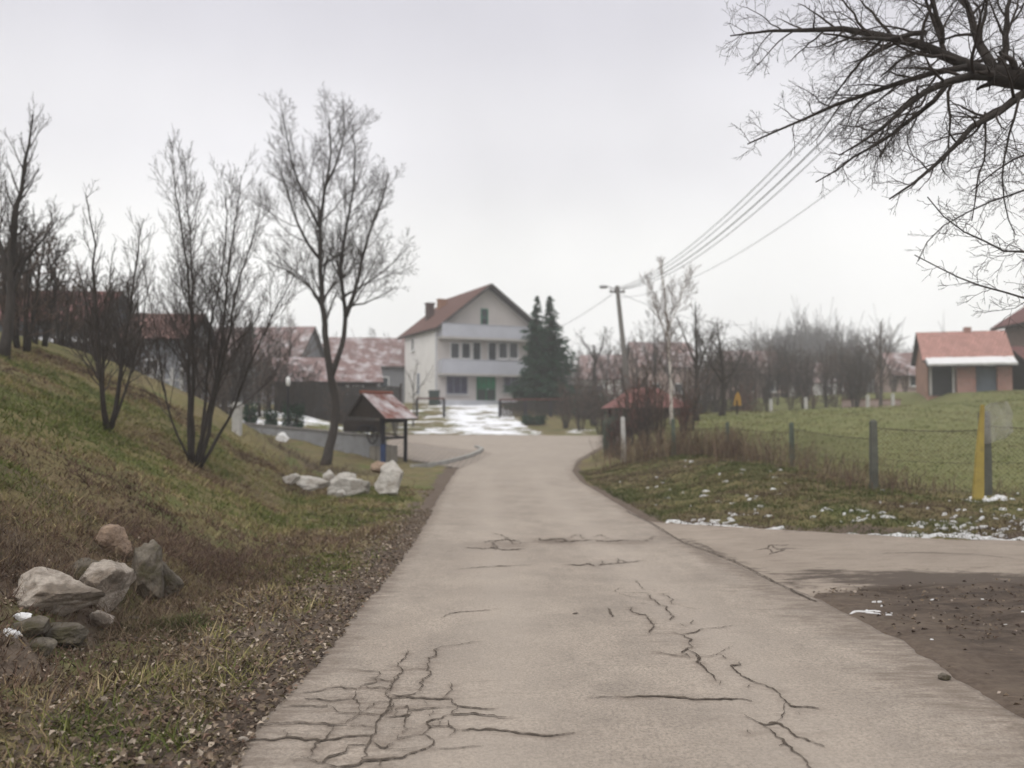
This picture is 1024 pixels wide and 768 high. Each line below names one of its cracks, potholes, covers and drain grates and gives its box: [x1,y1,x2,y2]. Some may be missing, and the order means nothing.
crack [539,534,654,542]
crack [599,581,824,768]
crack [447,533,521,569]
crack [249,641,575,767]
